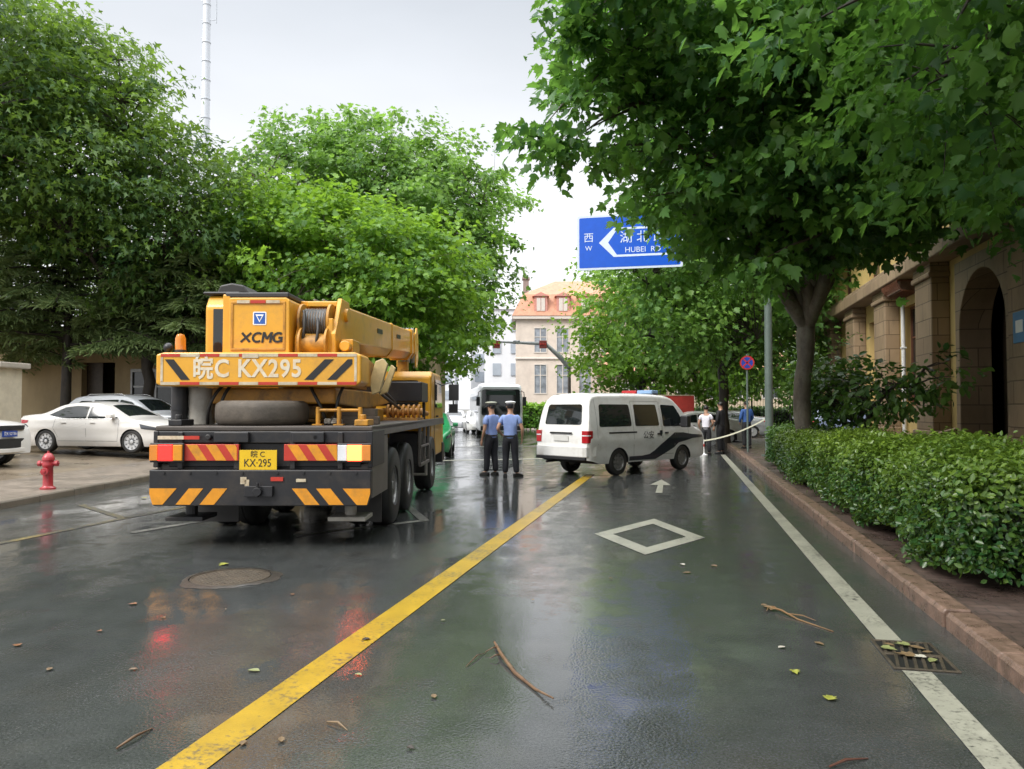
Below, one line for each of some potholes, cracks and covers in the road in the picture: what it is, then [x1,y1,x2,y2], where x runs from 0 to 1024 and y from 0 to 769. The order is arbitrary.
manhole cover [180,567,283,589]
drain grate [870,639,962,674]
